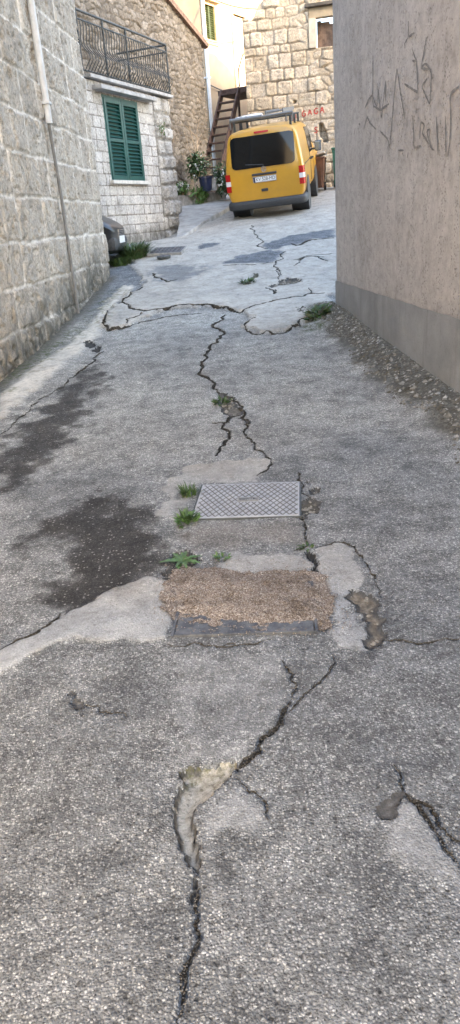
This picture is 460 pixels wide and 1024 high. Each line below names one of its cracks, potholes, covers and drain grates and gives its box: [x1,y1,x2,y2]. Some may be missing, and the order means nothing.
pothole [344,589,388,649]
crack [176,891,201,1021]
pothole [374,792,406,820]
crack [236,654,335,820]
pothole [172,762,237,905]
manhole cover [192,481,302,521]
crack [393,762,460,866]
crack [102,225,333,475]
crack [294,472,380,595]
